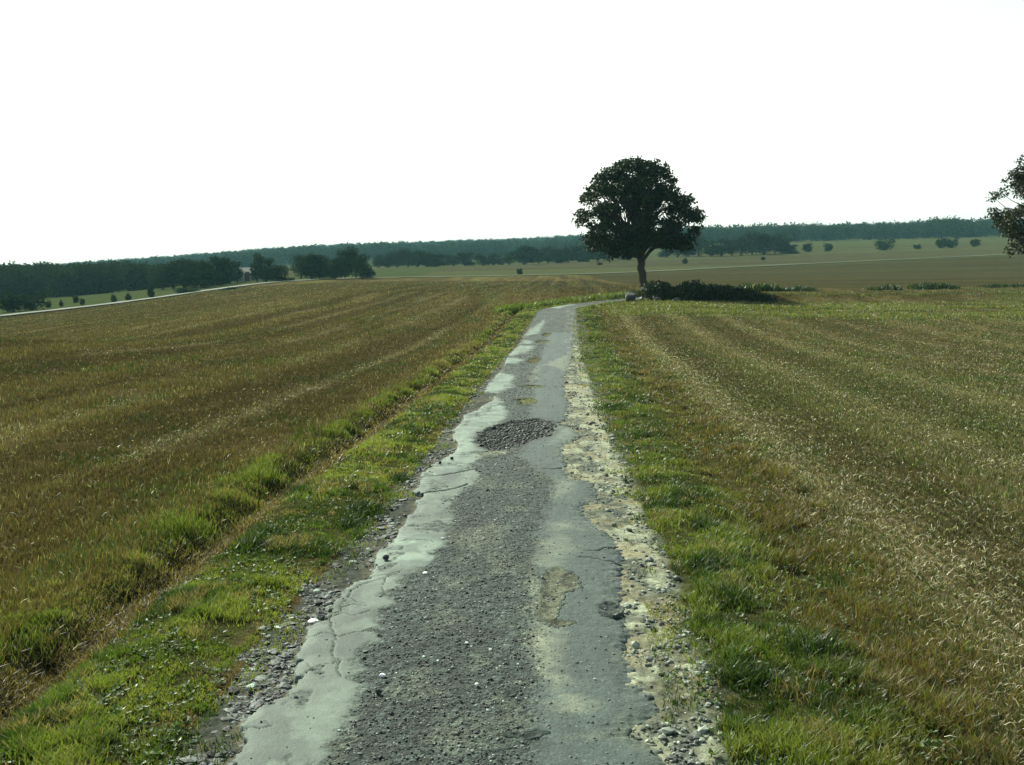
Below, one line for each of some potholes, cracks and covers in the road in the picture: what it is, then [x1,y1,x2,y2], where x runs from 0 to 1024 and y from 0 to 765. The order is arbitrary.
pothole [473,417,558,451]
crack [302,572,400,677]
pothole [503,724,551,740]
crack [579,546,623,566]
crack [419,469,478,495]
pothole [595,600,625,619]
pothole [499,686,522,702]
